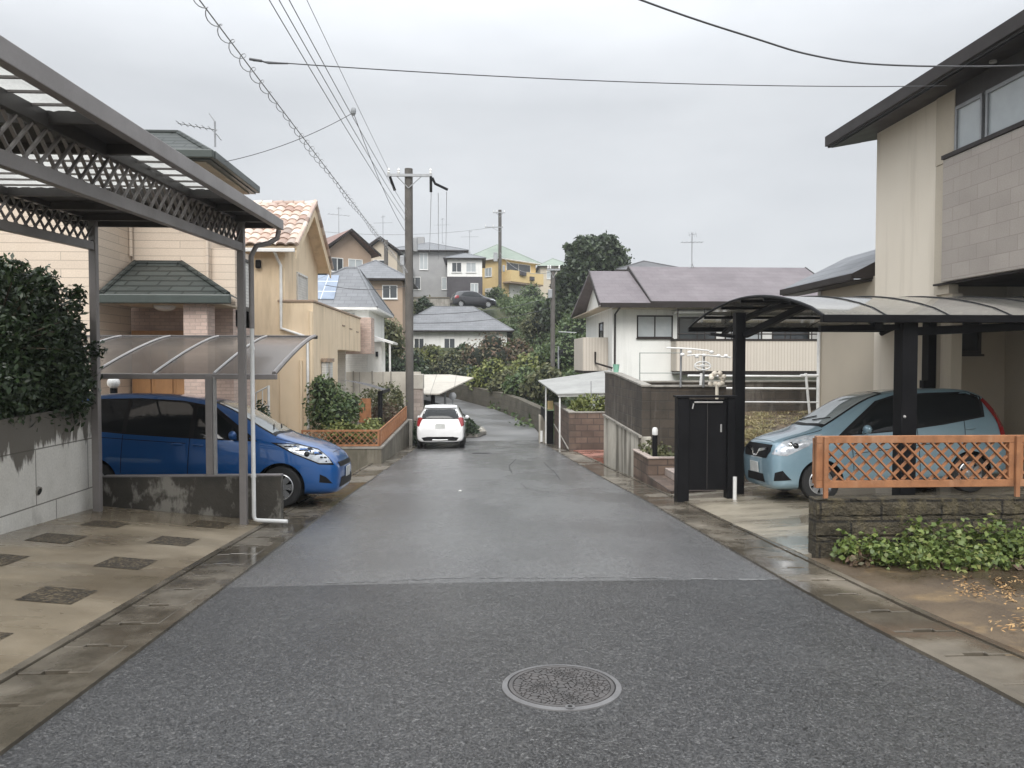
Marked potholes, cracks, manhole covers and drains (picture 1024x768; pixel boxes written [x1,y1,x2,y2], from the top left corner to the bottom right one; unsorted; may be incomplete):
manhole cover [502,664,622,712]
